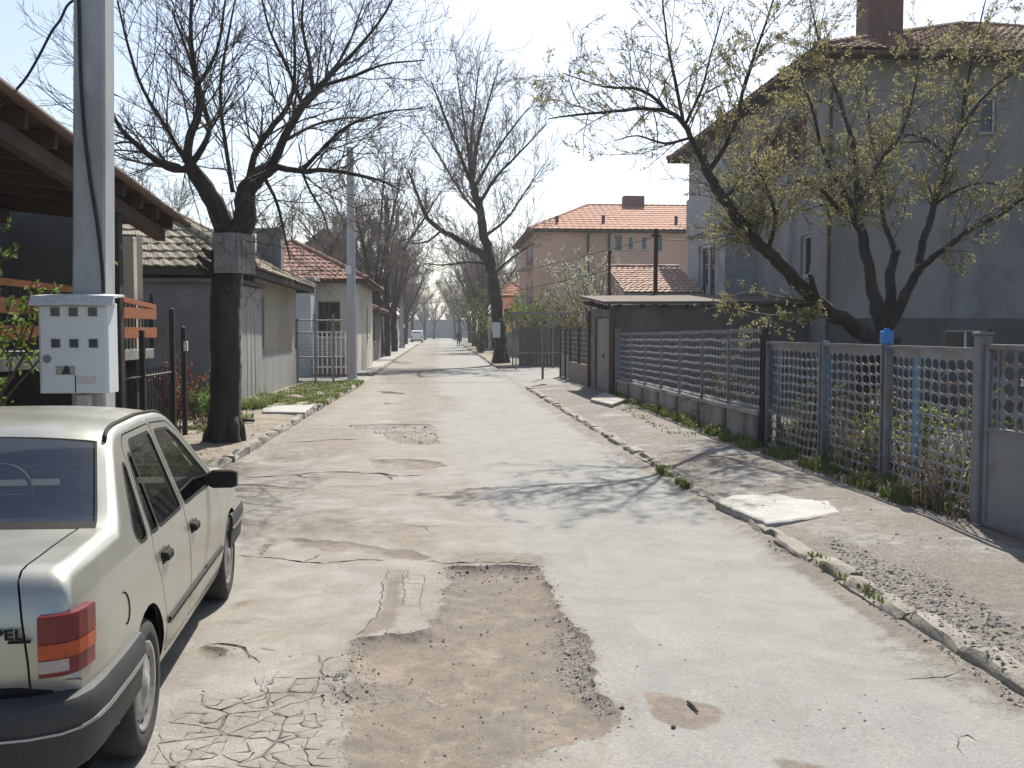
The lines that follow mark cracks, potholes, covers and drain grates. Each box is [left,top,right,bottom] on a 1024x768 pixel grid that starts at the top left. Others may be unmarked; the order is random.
crack [251,471,419,480]
crack [206,643,276,663]
pothole [332,565,622,768]
crack [905,669,968,682]
crack [240,550,536,636]
crack [150,655,343,768]
pothole [346,424,446,445]
